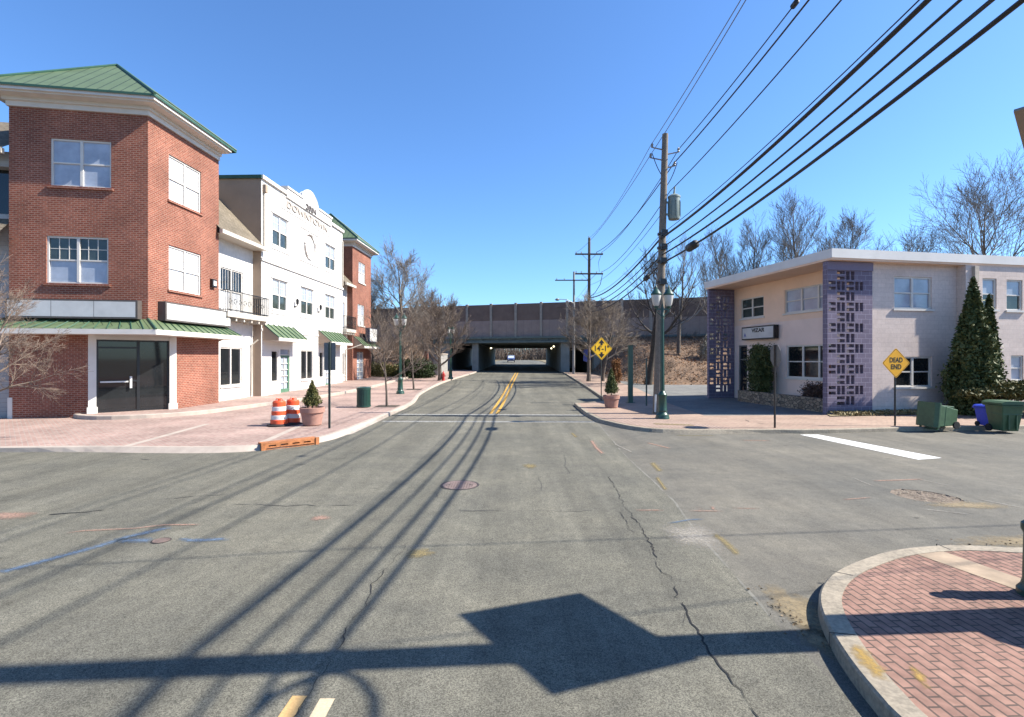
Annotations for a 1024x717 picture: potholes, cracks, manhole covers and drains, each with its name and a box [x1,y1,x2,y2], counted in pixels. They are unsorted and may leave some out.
pothole [890,489,968,507]
crack [609,478,759,717]
manhole cover [440,480,479,490]
